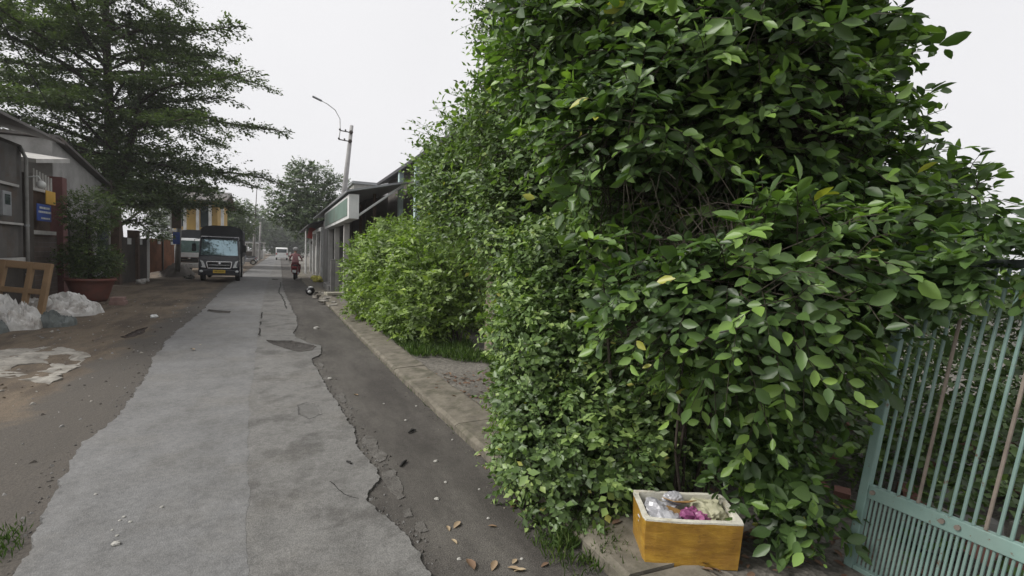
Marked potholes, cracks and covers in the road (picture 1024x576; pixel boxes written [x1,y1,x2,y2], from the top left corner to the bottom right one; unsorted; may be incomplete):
pothole [121,327,148,338]
pothole [267,340,317,352]
